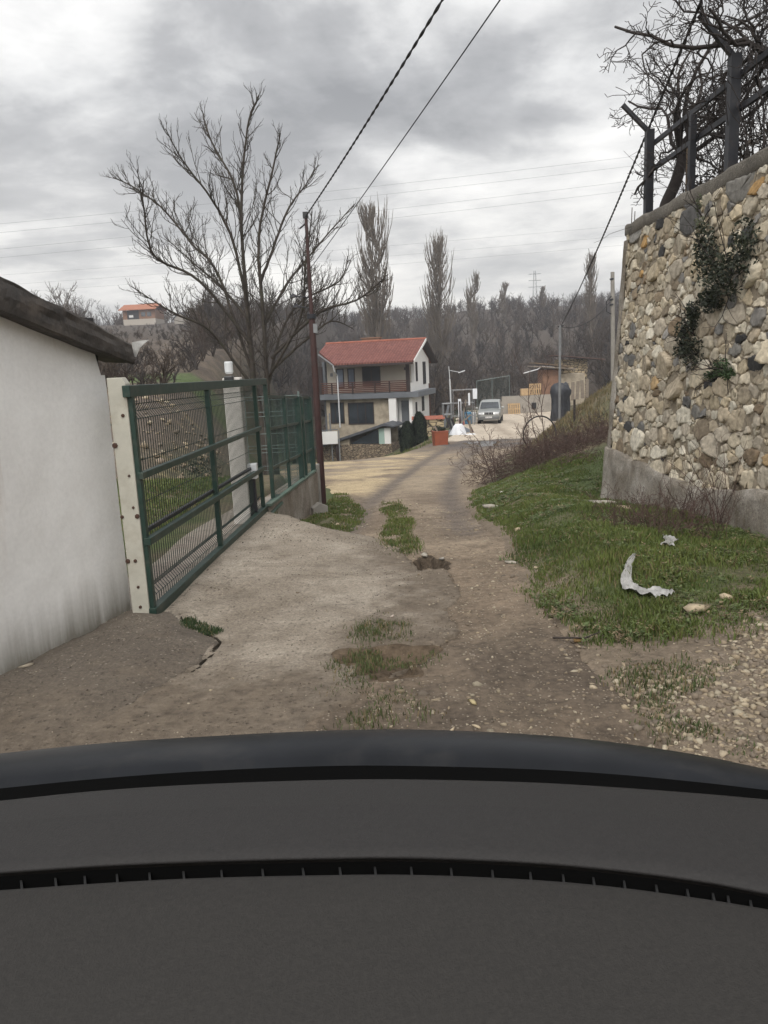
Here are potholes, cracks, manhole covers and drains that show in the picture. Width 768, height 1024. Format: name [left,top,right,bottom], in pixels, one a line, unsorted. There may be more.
pothole [332,644,443,682]
pothole [413,555,451,571]
crack [179,614,221,672]
